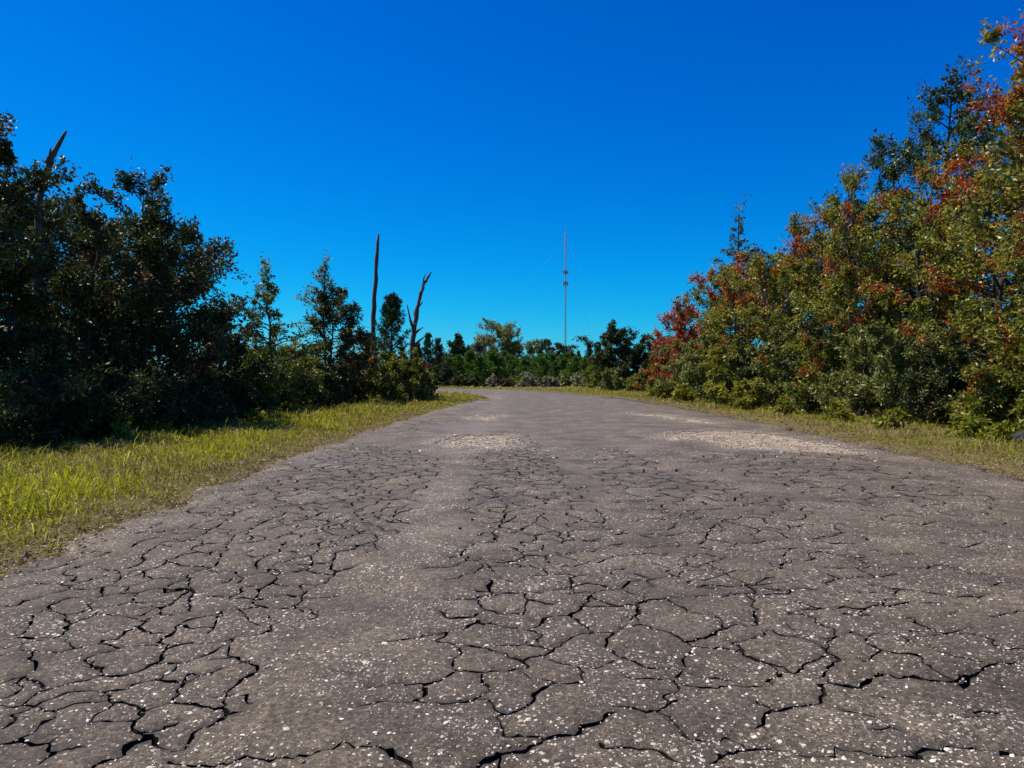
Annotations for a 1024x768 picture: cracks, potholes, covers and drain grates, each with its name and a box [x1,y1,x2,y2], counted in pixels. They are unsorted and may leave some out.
crack [0,443,443,768]
crack [362,430,1020,768]
